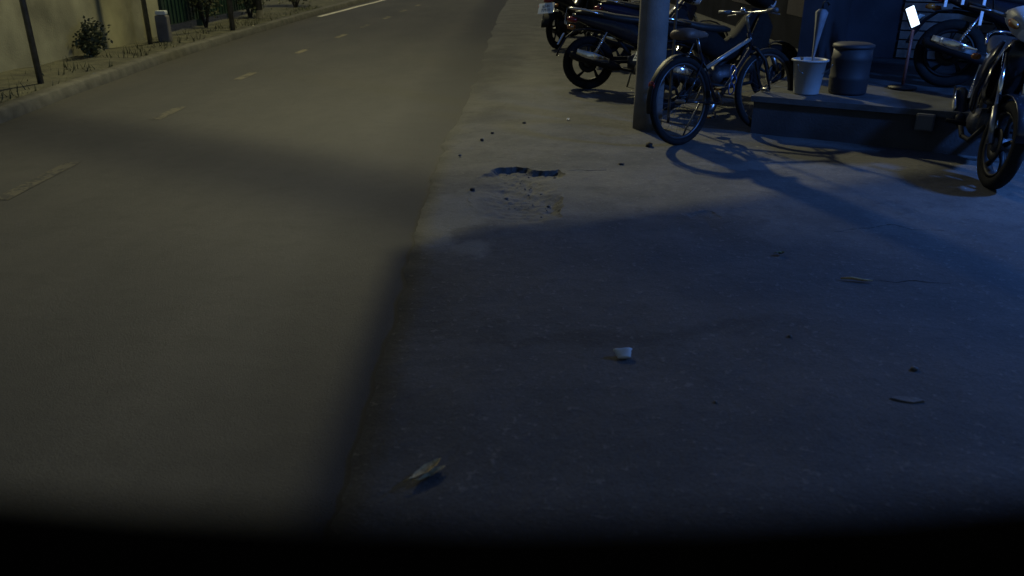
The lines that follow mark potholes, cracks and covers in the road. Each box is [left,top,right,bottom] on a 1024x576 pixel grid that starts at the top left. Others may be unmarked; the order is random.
pothole [468,167,566,230]
